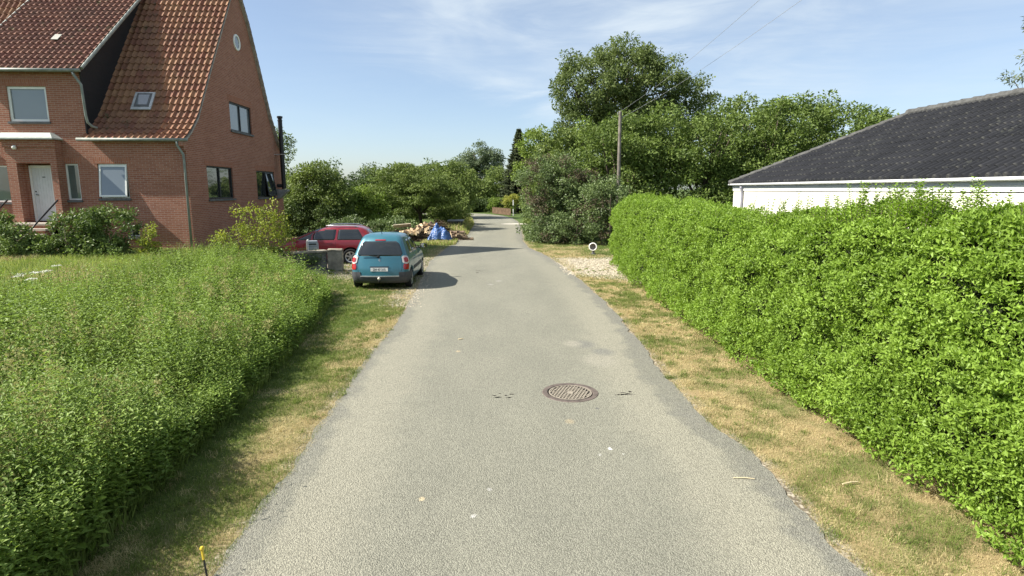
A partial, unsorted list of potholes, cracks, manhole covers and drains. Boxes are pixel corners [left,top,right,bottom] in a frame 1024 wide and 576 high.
manhole cover [542,383,599,402]
